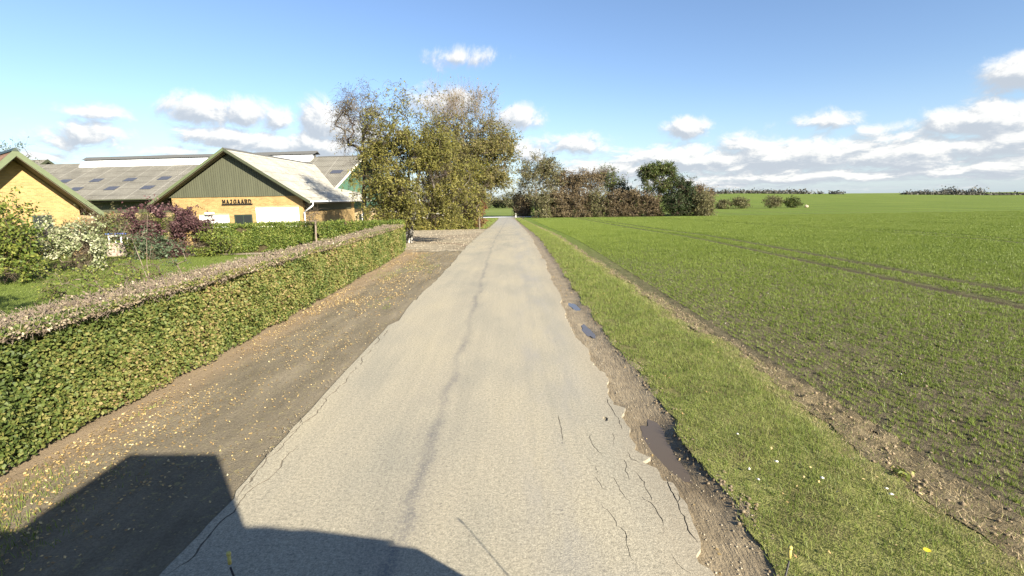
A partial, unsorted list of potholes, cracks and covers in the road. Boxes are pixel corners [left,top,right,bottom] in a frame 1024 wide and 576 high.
crack [589,399,698,573]
